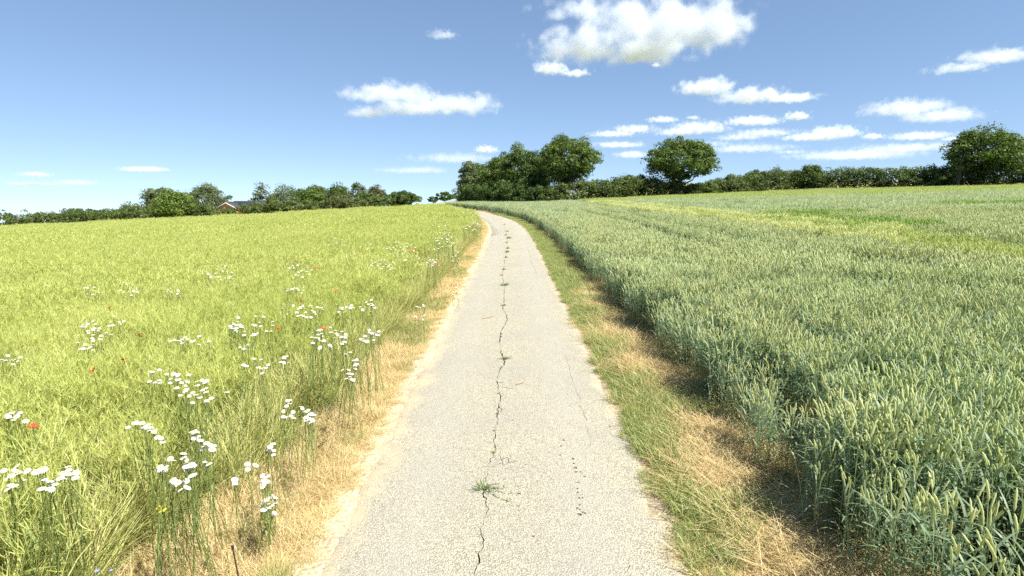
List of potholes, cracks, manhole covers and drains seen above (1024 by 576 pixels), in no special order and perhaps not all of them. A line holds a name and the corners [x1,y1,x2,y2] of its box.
crack [474,243,516,575]
